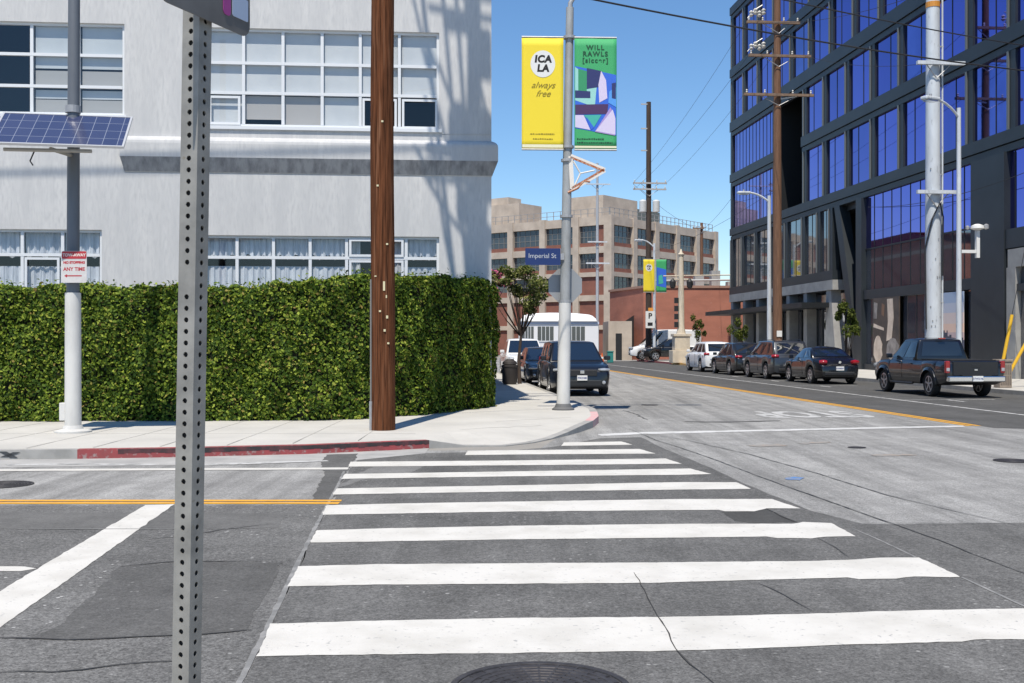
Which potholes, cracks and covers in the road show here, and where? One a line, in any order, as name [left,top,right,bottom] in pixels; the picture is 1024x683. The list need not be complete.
manhole cover [451,661,629,683]
manhole cover [0,480,34,488]
crack [634,573,714,683]
crack [5,660,172,672]
